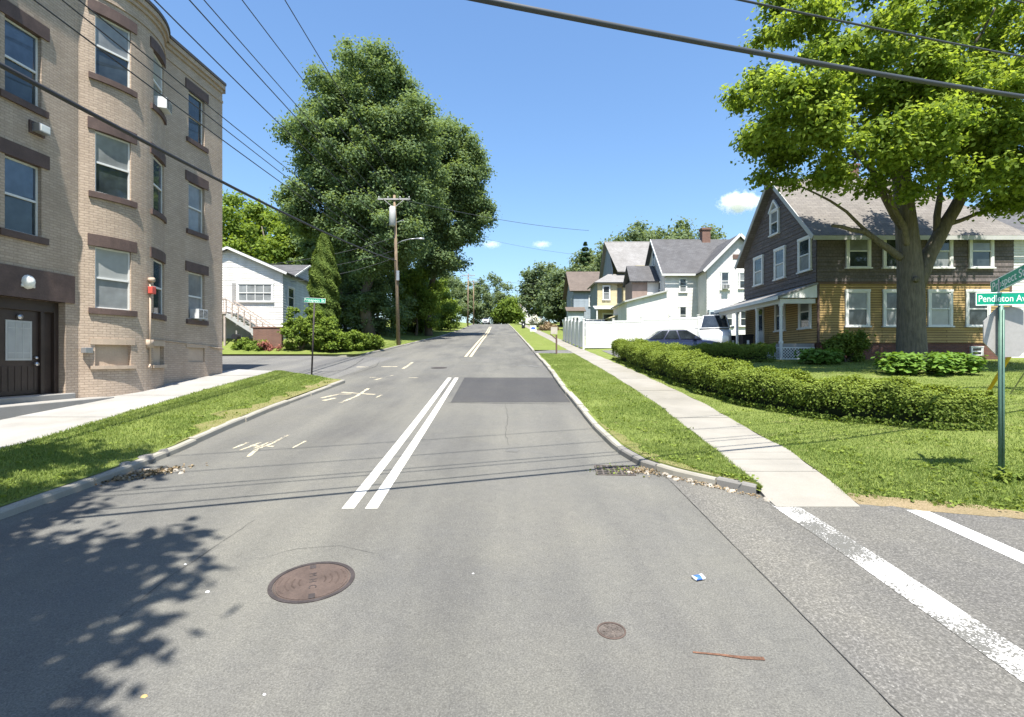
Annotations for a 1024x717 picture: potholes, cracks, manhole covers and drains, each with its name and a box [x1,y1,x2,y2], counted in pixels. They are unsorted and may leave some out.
manhole cover [597,622,626,640]
drain grate [594,465,636,476]
manhole cover [267,561,355,604]
